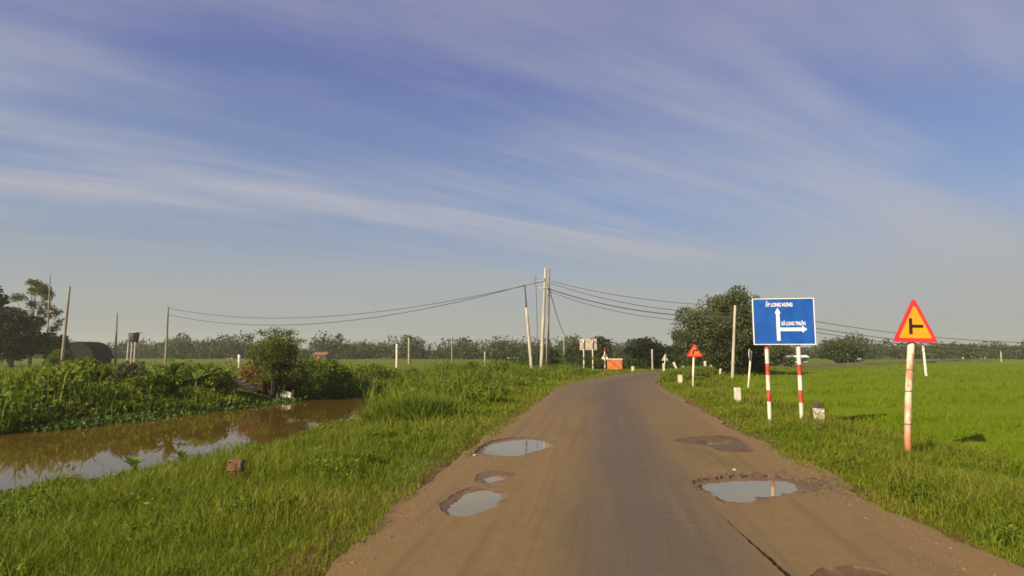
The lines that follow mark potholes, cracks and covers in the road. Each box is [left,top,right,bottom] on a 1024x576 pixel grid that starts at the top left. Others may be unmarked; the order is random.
pothole [679,468,878,508]
pothole [474,437,557,456]
crack [718,514,791,576]
pothole [438,486,510,517]
pothole [474,471,516,483]
